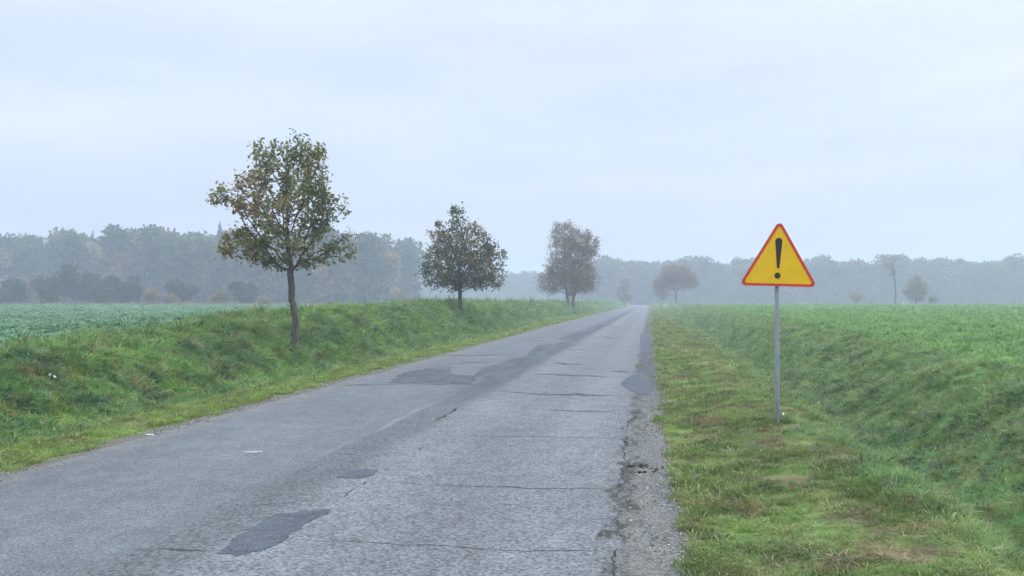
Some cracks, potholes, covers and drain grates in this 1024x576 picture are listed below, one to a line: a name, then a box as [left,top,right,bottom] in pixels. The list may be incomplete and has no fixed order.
crack [312,540,589,552]
crack [398,349,644,576]
